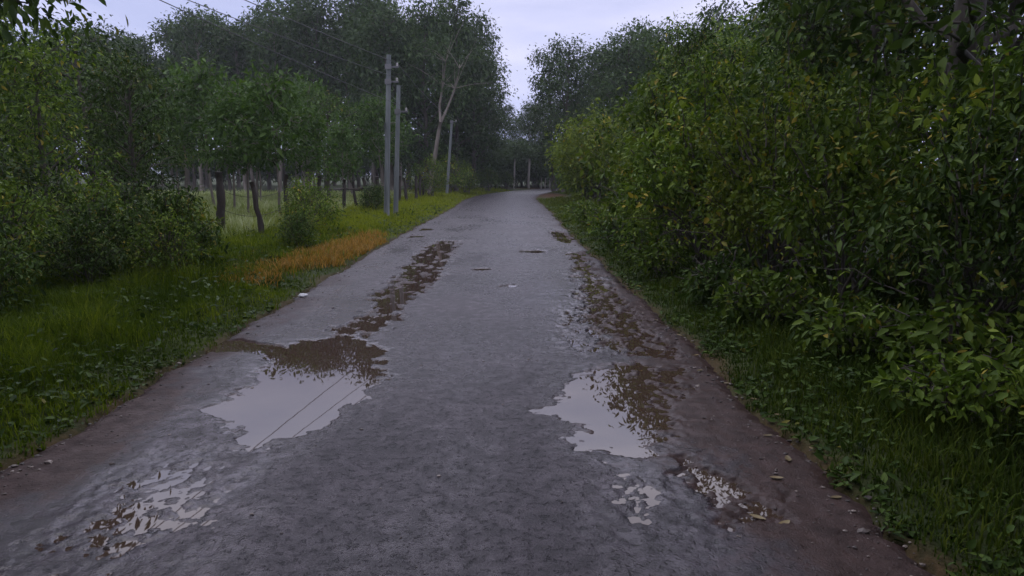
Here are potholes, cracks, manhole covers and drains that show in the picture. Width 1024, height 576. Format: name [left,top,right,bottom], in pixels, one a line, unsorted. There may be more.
pothole [511,359,710,470]
pothole [543,229,576,243]
pothole [189,334,404,458]
pothole [655,446,812,541]
